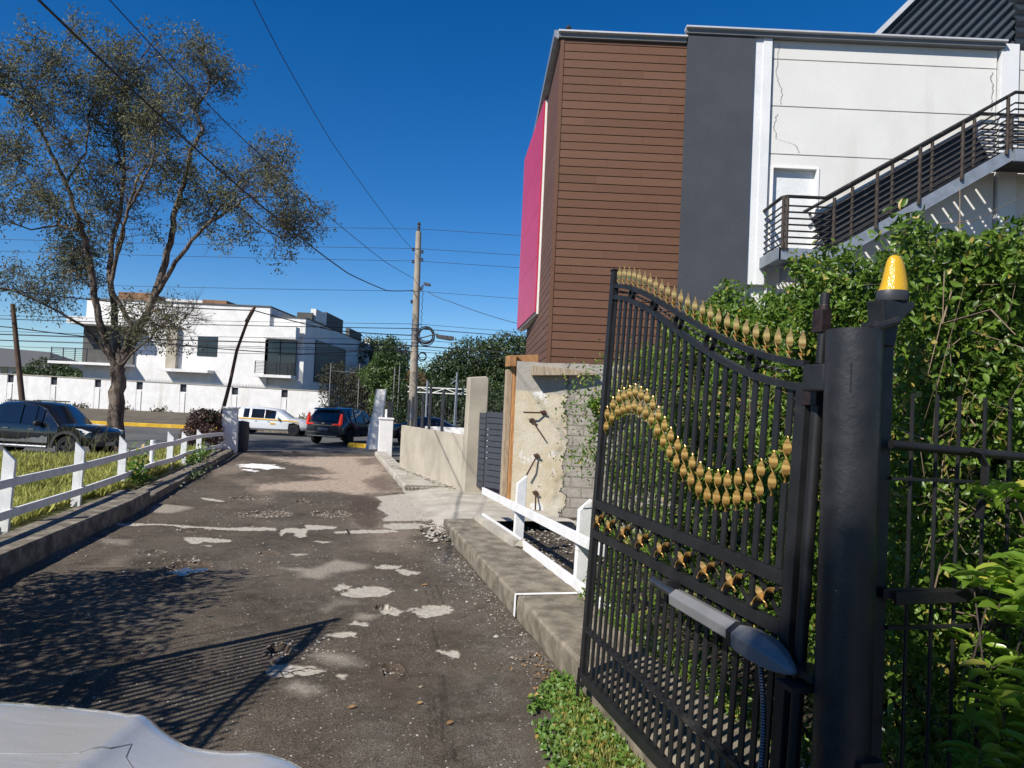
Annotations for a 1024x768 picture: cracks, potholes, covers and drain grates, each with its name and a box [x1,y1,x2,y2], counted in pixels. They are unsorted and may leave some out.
pothole [382,662,405,679]
pothole [311,510,352,518]
pothole [232,510,294,518]
pothole [149,556,231,576]
